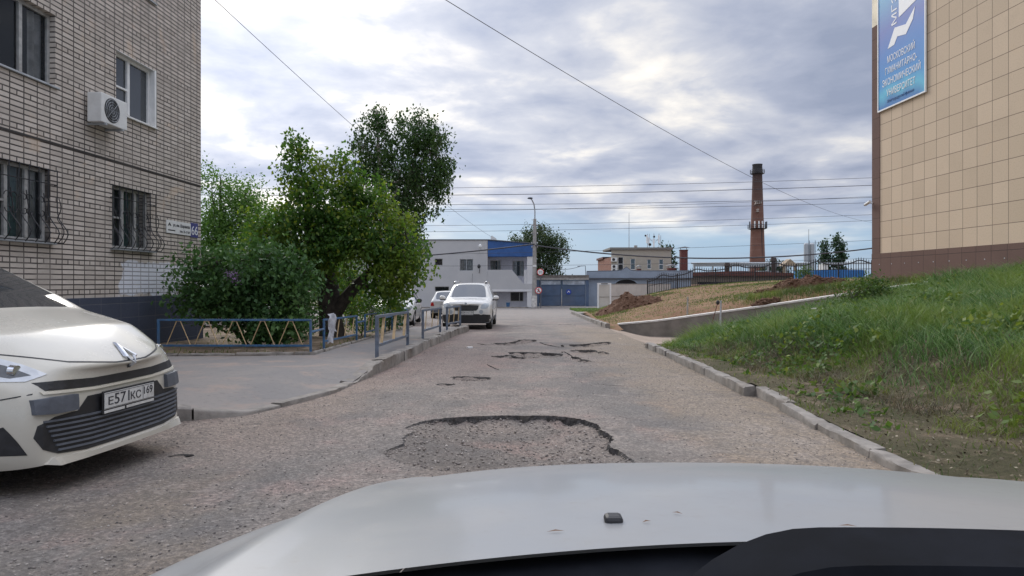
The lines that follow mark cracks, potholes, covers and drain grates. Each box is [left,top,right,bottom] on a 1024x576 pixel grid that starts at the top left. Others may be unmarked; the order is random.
pothole [383,415,636,473]
